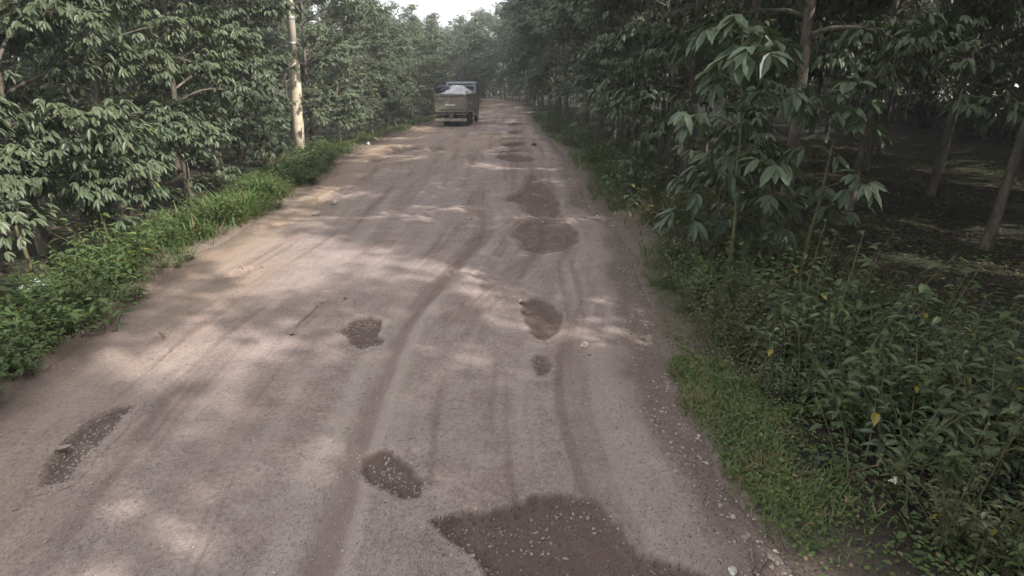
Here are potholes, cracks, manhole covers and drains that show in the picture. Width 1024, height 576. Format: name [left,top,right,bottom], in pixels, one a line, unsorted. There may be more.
pothole [416,482,723,576]
pothole [349,442,438,509]
crack [286,296,345,334]
pothole [488,152,543,163]
pothole [24,400,146,497]
pothole [521,349,562,383]
pothole [510,295,571,344]
pothole [494,171,590,257]
pothole [327,312,392,354]
